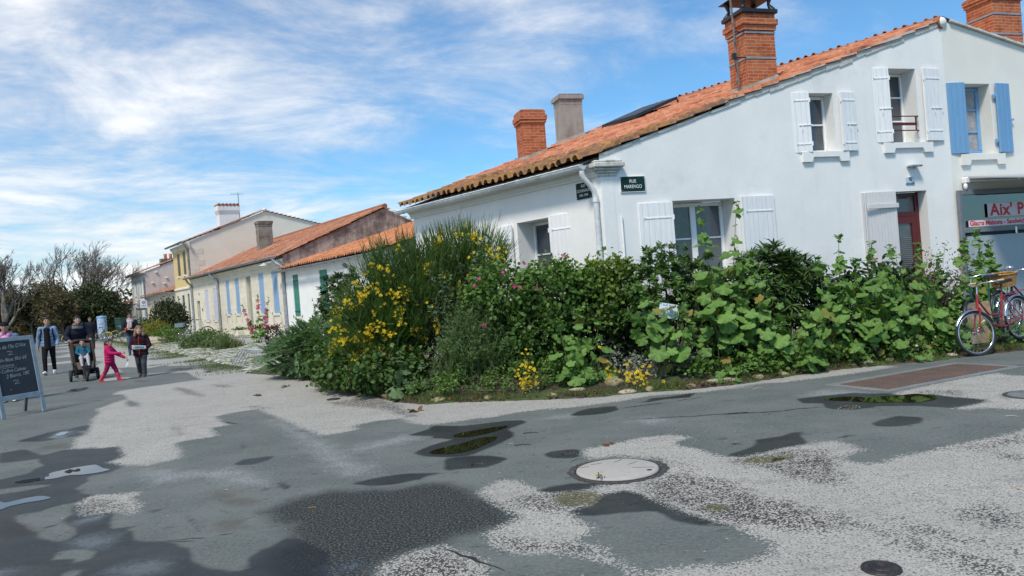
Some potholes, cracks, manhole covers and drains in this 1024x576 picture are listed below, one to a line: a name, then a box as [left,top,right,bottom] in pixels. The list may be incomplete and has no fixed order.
crack [626,397,815,419]
crack [444,548,505,574]
manhole cover [567,458,670,485]
manhole cover [860,560,903,576]
manhole cover [1002,390,1024,399]
